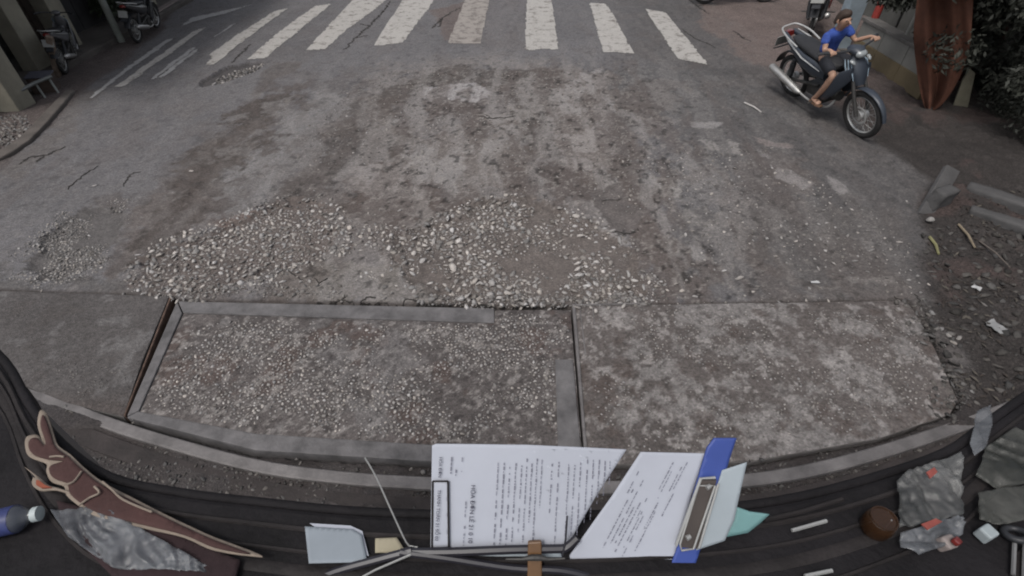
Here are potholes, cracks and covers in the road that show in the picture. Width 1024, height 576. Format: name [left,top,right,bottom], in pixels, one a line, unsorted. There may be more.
pothole [377,190,656,310]
pothole [197,61,265,88]
pothole [18,204,128,283]
crack [19,146,98,189]
crack [343,1,391,50]
crack [431,8,460,28]
pothole [124,195,356,301]
